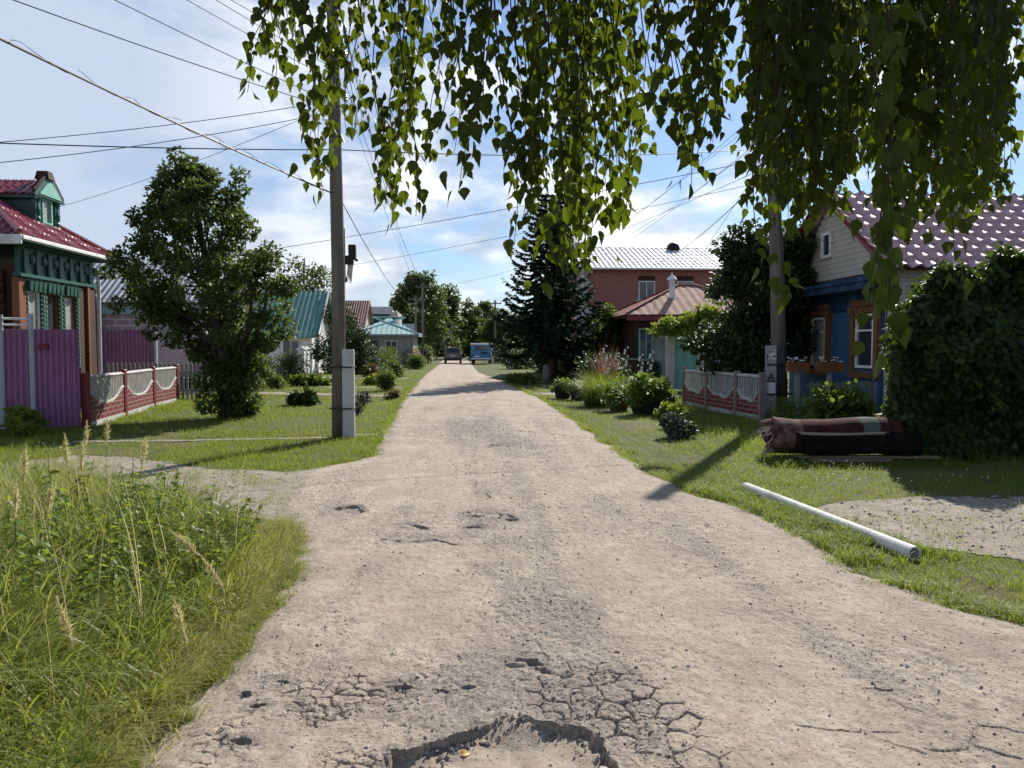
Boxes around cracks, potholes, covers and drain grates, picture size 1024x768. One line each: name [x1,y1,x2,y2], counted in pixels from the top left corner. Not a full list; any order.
crack [794,687,1024,760]
pothole [335,505,365,514]
pothole [385,712,619,768]
pothole [464,511,520,523]
crack [522,639,755,768]
